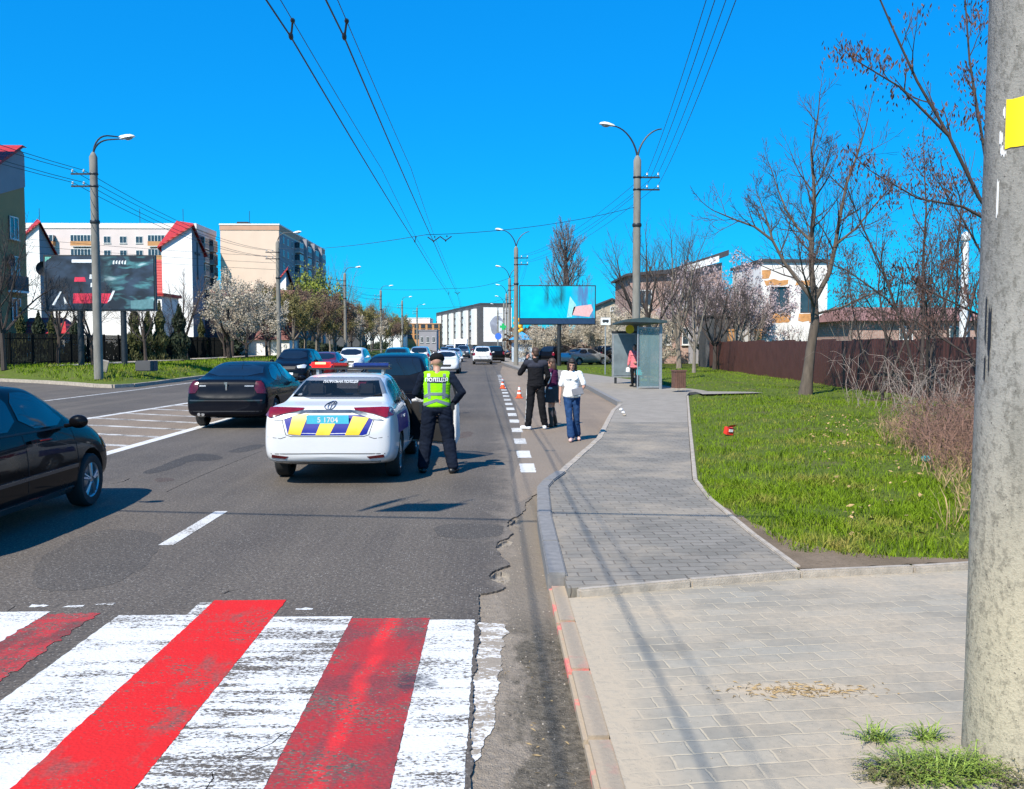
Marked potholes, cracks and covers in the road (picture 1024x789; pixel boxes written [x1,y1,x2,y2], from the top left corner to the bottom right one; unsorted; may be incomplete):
pothole [491,571,511,583]
